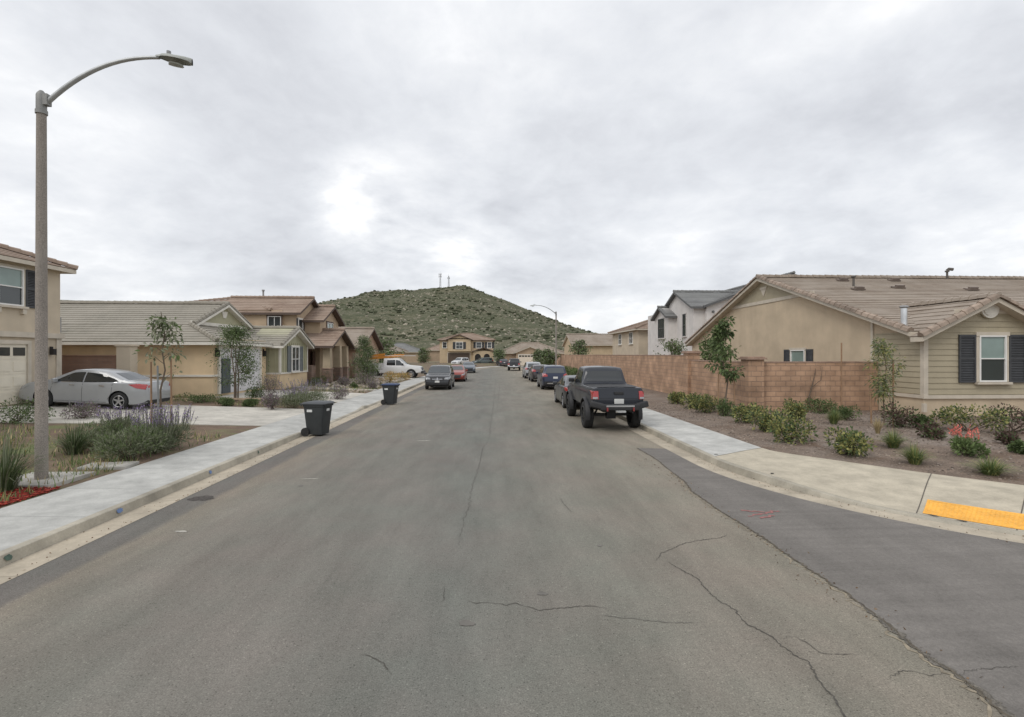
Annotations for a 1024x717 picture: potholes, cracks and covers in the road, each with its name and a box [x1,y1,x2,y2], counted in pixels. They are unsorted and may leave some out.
crack [656,535,866,717]
crack [473,602,693,623]
